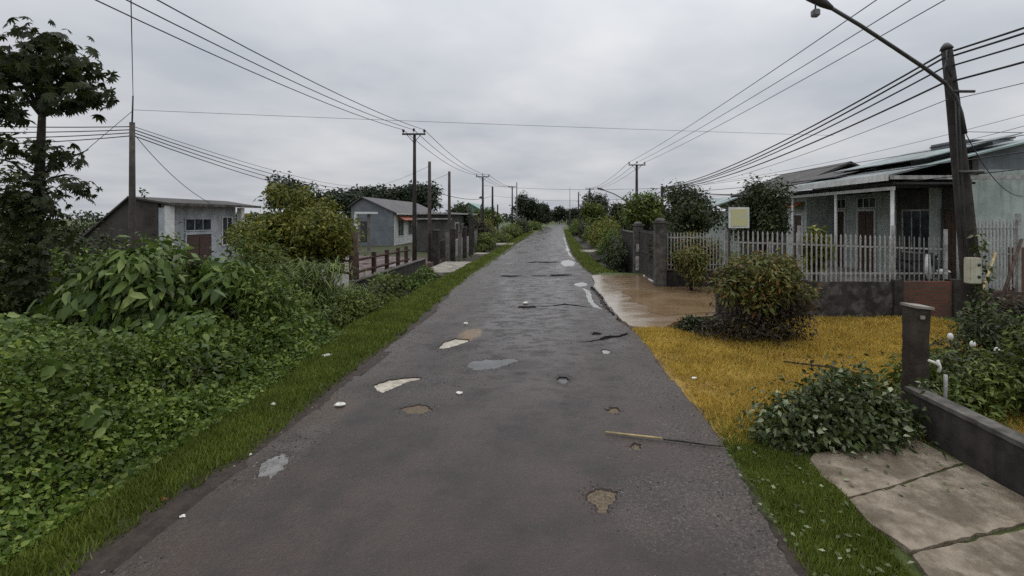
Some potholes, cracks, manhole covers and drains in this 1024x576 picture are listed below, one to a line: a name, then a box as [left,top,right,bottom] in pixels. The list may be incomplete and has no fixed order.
pothole [585,488,618,514]
crack [541,287,615,316]
pothole [399,404,433,414]
crack [584,333,628,342]
